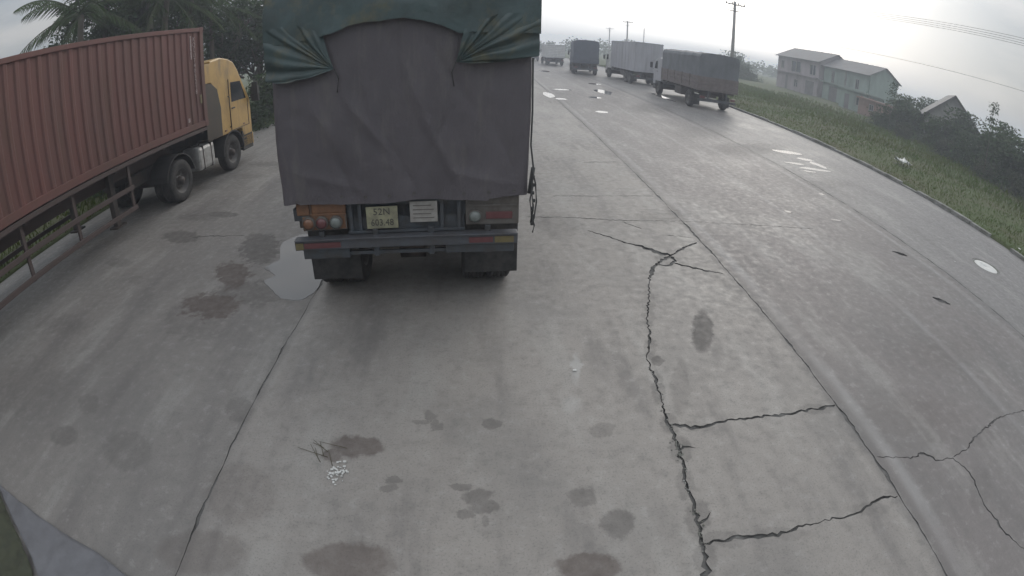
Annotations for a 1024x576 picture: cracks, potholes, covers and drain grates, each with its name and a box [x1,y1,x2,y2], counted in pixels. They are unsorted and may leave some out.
crack [543,217,897,576]
manhole cover [972,258,999,274]
crack [878,410,1024,549]
